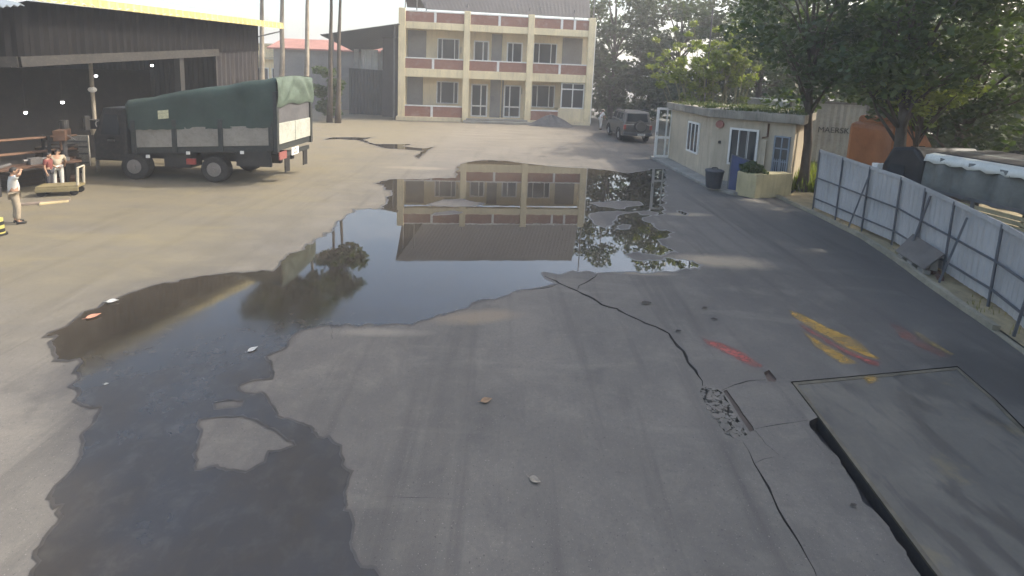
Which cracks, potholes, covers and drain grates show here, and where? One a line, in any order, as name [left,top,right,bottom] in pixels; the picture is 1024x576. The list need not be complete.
crack [723,380,817,576]
crack [533,276,703,386]
pothole [699,386,747,438]
